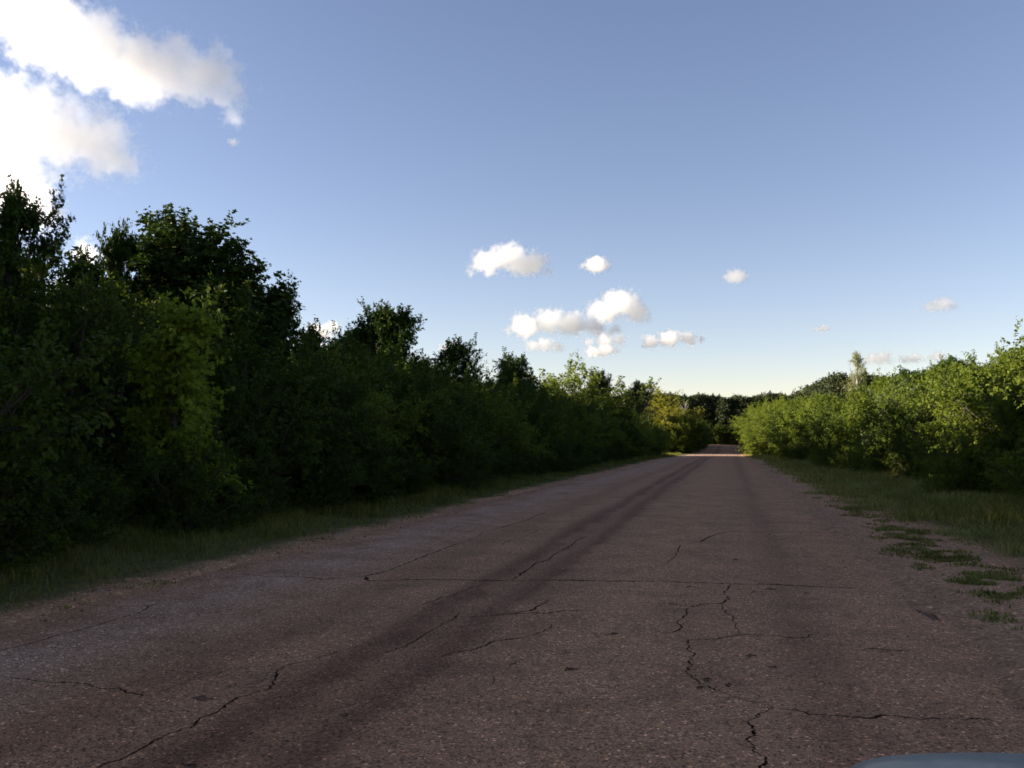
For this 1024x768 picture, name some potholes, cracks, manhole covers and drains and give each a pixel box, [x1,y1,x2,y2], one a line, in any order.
crack [11,650,340,768]
crack [0,603,156,651]
crack [246,513,1000,768]
